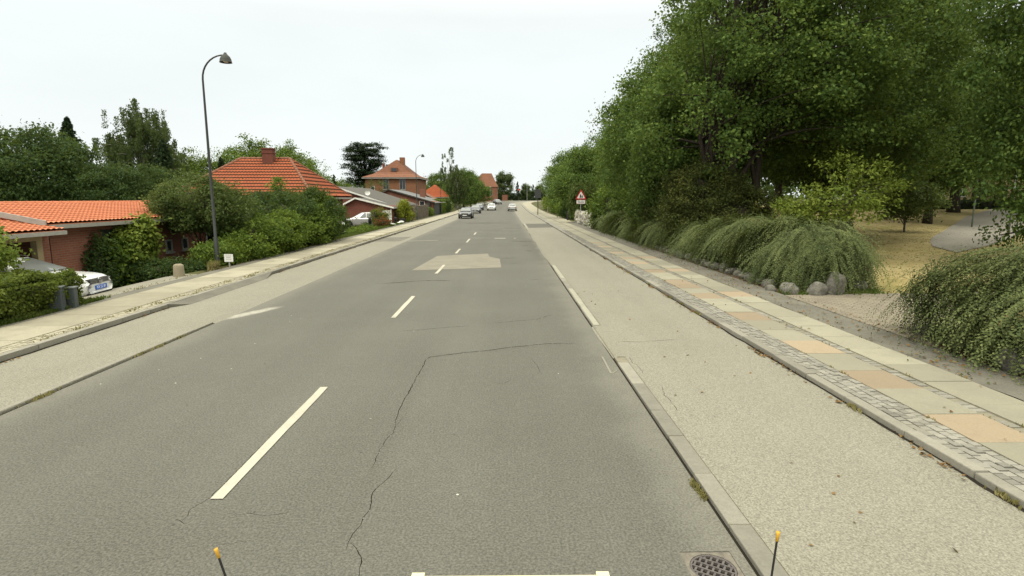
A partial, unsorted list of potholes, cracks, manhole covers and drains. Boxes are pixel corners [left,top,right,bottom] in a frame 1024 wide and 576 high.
crack [346,343,571,575]
crack [176,453,254,524]
drain grate [680,552,744,576]
